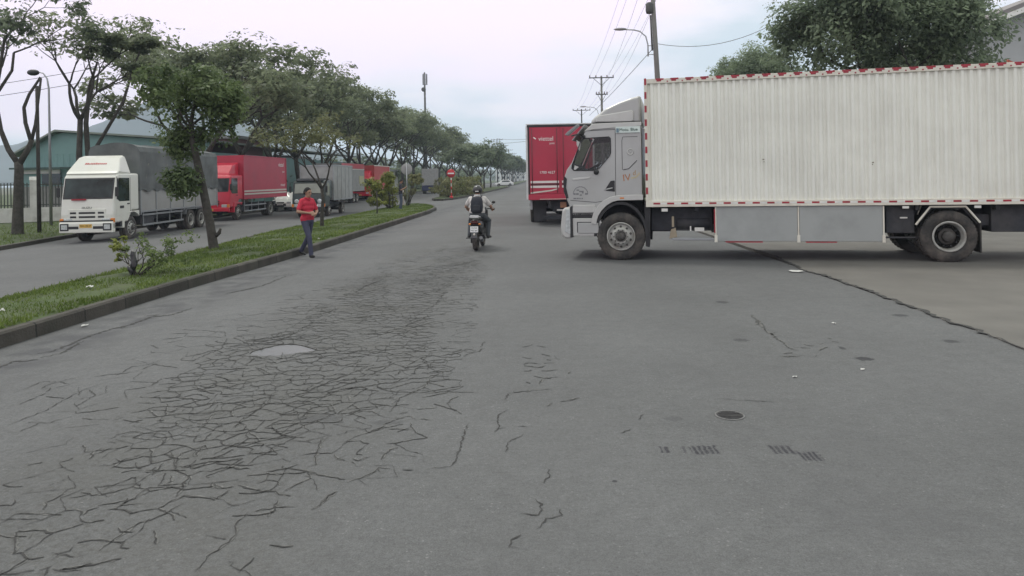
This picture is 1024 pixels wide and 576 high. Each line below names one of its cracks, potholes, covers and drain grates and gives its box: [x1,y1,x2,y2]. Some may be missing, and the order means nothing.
crack [495,344,578,452]
manhole cover [715,410,745,420]
crack [509,500,563,548]
crack [749,314,836,357]
crack [0,241,491,576]
